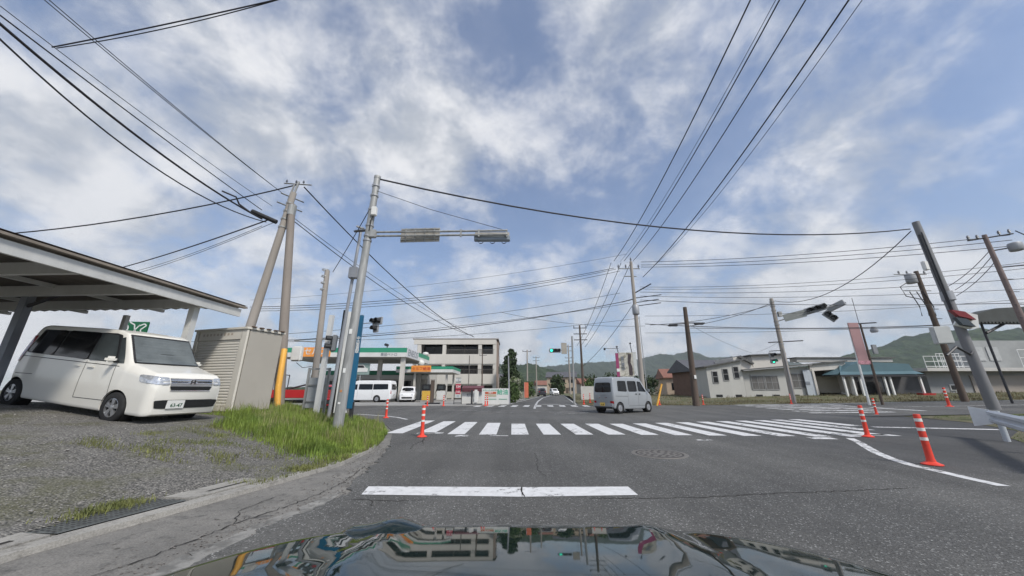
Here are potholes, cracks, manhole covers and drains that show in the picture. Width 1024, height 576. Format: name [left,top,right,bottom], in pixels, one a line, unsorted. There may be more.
drain grate [19,499,185,534]
crack [92,466,405,576]
crack [590,487,913,499]
manhole cover [631,449,689,459]
